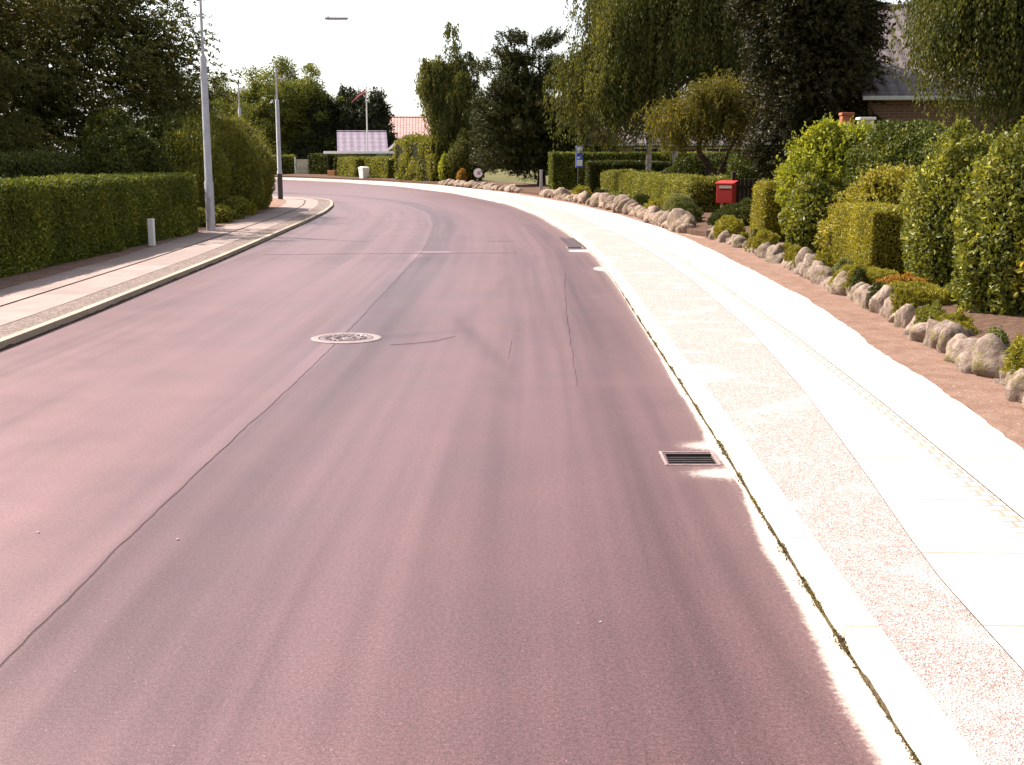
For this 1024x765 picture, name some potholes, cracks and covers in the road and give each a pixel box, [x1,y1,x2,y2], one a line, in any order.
drain grate [659,451,722,465]
manhole cover [311,333,382,344]
